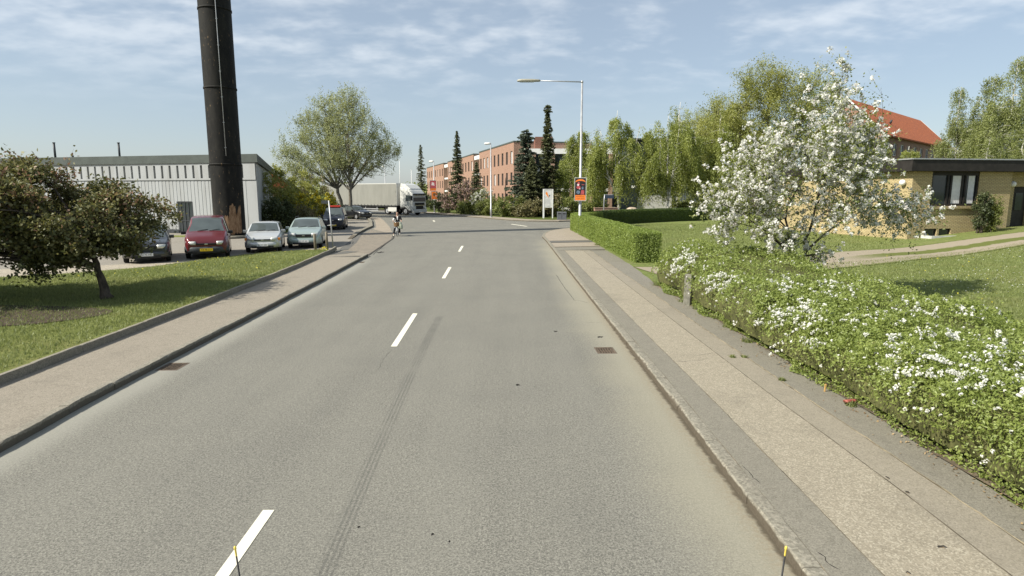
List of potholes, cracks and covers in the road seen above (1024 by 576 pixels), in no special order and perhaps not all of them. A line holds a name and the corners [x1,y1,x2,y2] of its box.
drain grate [155,363,189,371]
